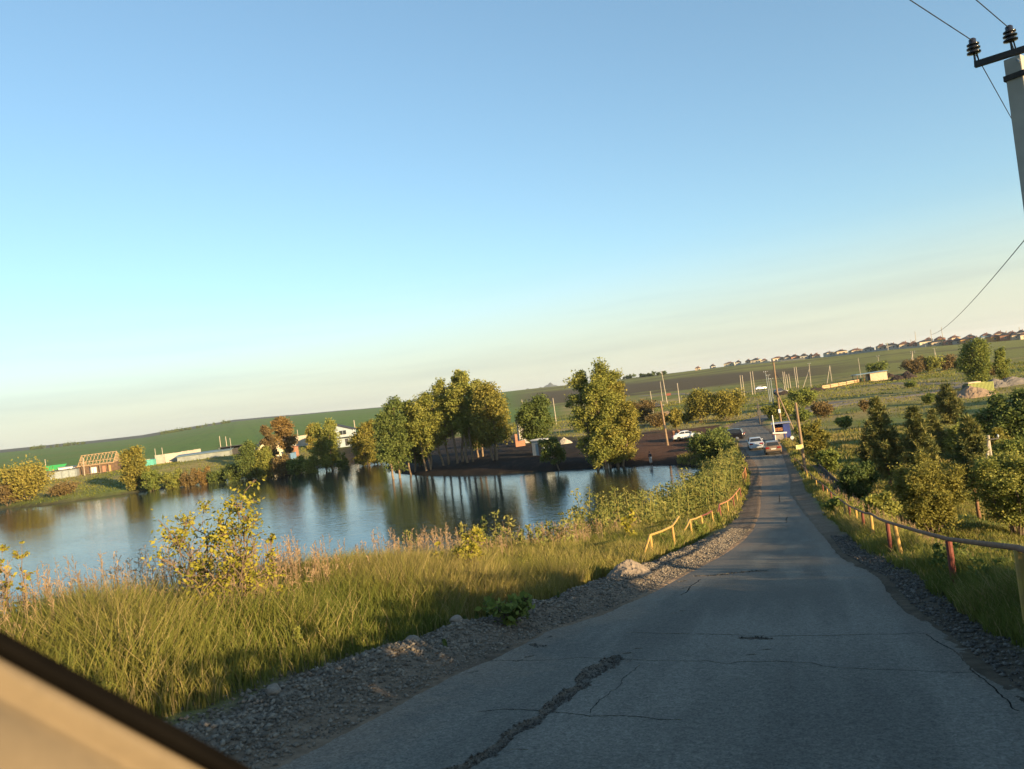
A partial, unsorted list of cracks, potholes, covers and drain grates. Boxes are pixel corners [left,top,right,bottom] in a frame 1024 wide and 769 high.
crack [637,632,1018,711]
crack [480,657,933,720]
